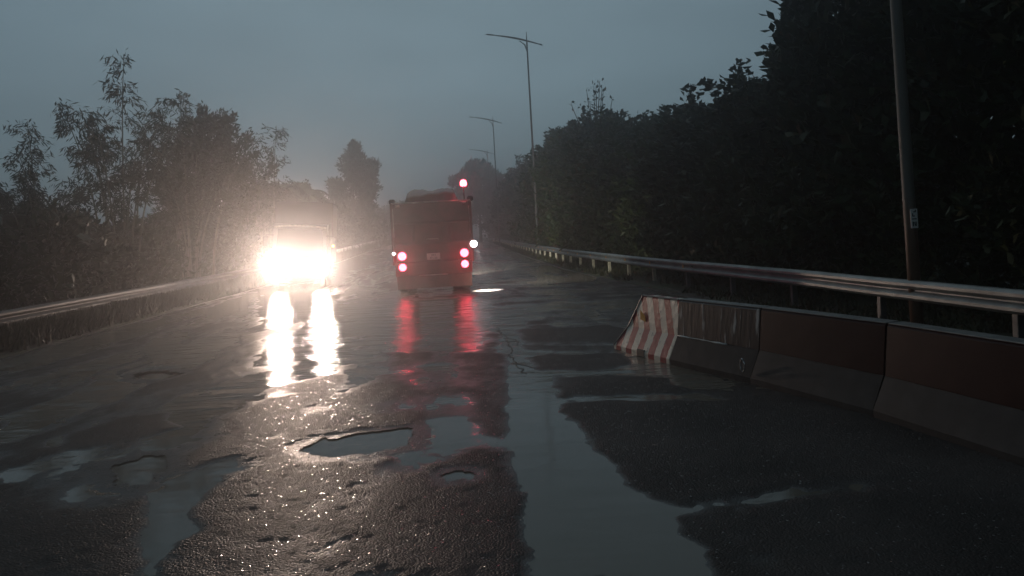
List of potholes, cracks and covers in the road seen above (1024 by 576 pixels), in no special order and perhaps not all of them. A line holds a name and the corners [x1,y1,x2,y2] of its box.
pothole [299,427,416,458]
pothole [440,470,476,482]
pothole [131,370,186,380]
crack [497,327,534,374]
pothole [110,455,169,487]
